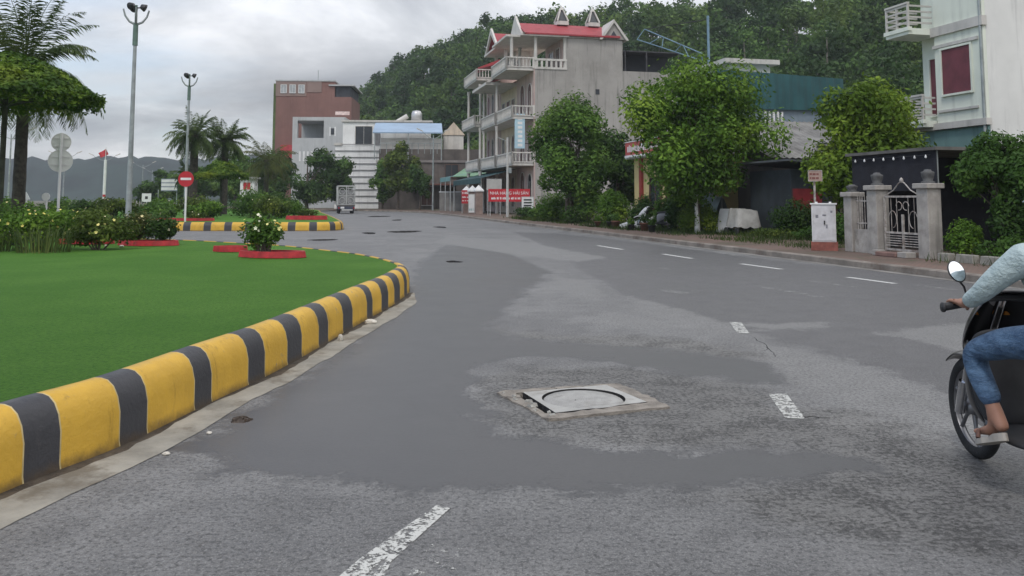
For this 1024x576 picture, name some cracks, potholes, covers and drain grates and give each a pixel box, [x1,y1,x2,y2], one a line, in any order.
manhole cover [496,384,670,422]
